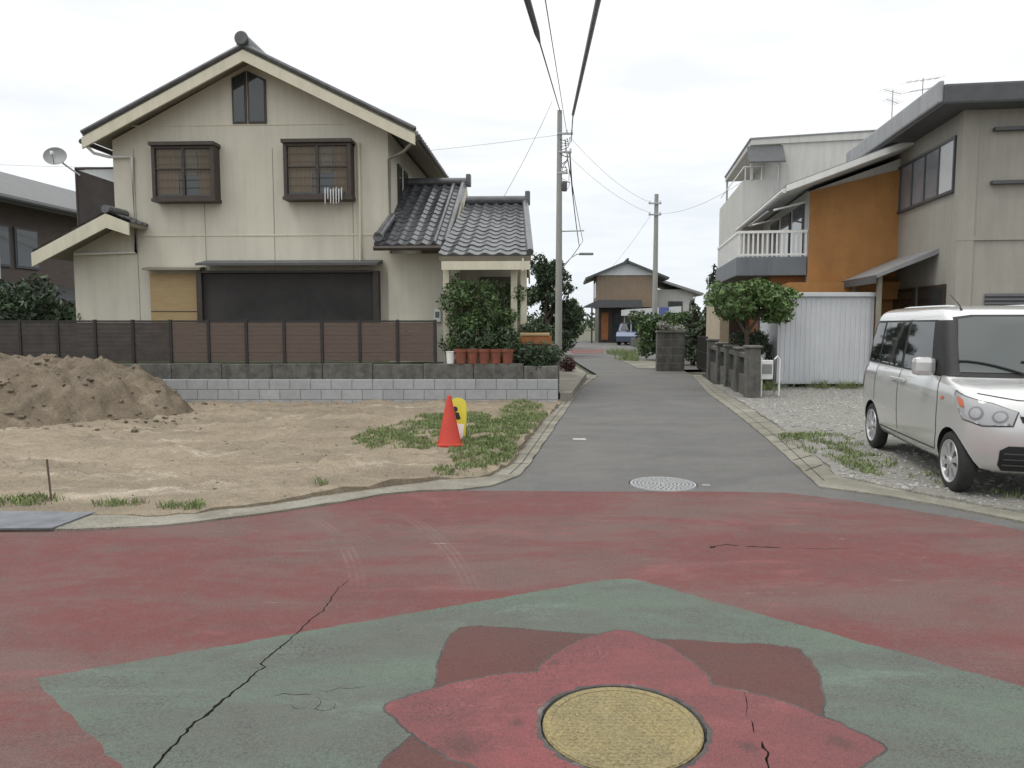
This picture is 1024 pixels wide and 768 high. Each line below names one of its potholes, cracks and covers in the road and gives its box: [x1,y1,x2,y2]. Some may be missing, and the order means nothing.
crack [744,693,770,768]
crack [153,583,369,768]
manhole cover [540,686,707,768]
manhole cover [629,477,698,491]
